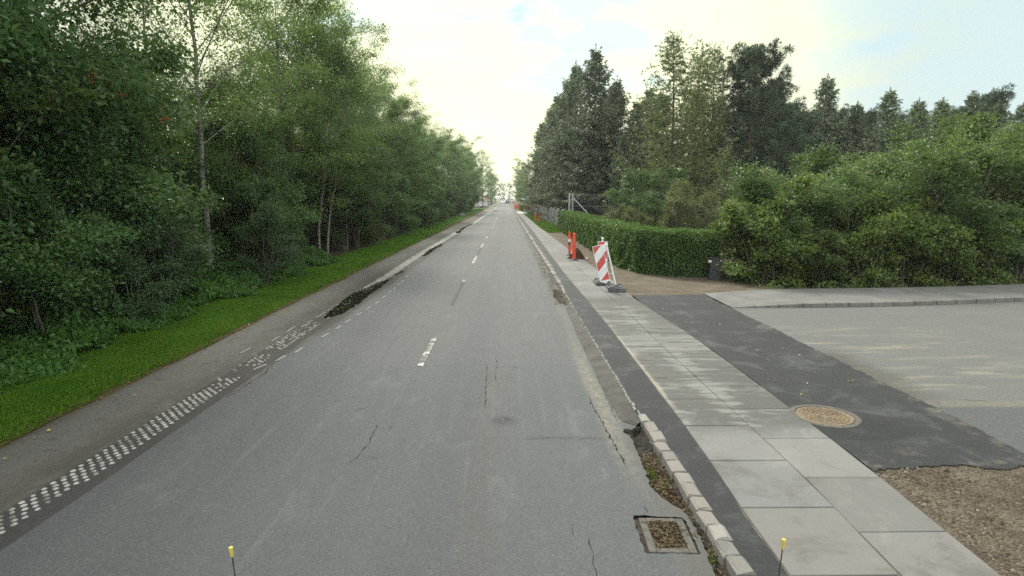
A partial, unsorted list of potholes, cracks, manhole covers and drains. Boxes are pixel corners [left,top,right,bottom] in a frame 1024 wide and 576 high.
crack [524,393,626,466]
drain grate [633,515,701,554]
pothole [553,289,567,305]
pothole [623,424,730,576]
manhole cover [789,404,862,430]
